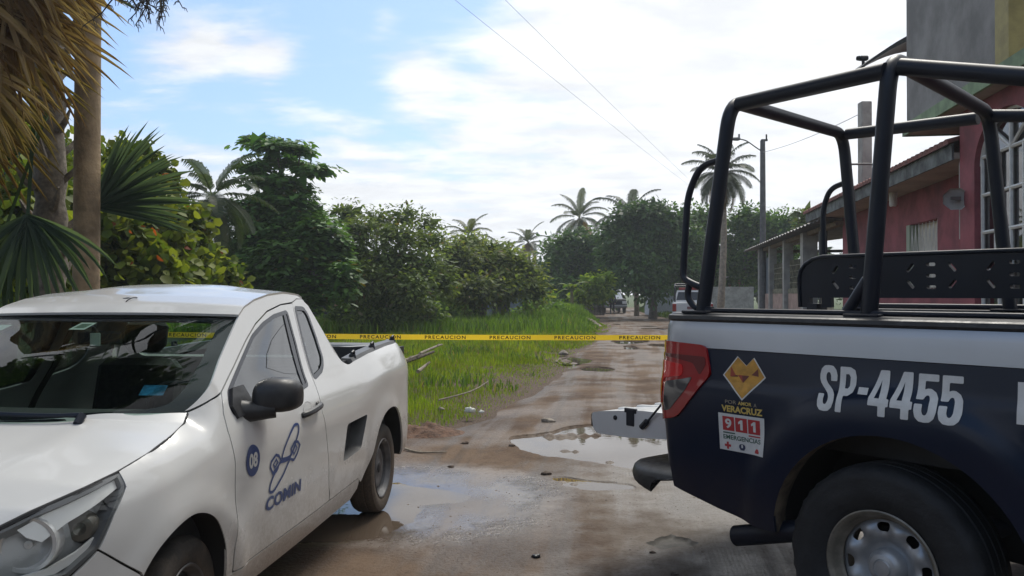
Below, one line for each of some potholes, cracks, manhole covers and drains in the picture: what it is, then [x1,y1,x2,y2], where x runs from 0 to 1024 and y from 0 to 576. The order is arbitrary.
pothole [509,424,668,469]
pothole [646,534,699,549]
